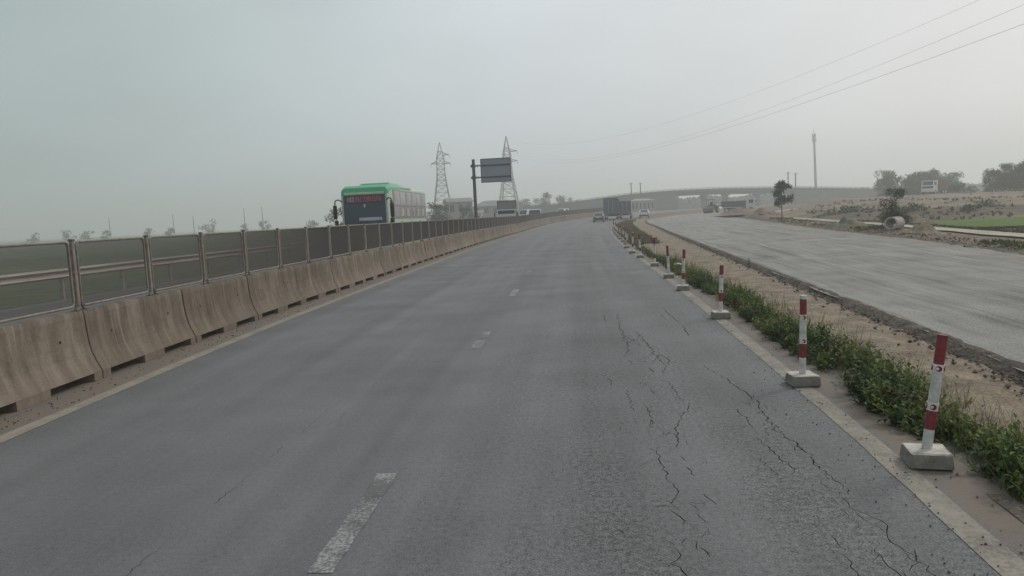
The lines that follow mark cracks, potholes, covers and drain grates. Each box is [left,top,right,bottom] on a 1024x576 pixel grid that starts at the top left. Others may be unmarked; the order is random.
crack [711,370,936,576]
crack [603,317,734,576]
